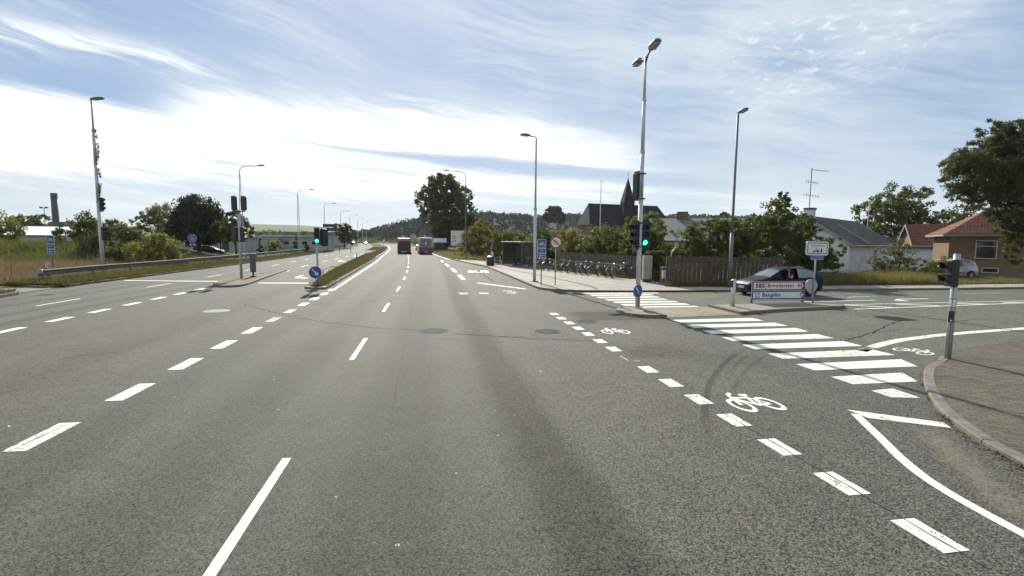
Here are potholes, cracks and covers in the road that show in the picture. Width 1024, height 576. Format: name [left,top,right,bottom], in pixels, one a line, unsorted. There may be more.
crack [835,312,920,341]
